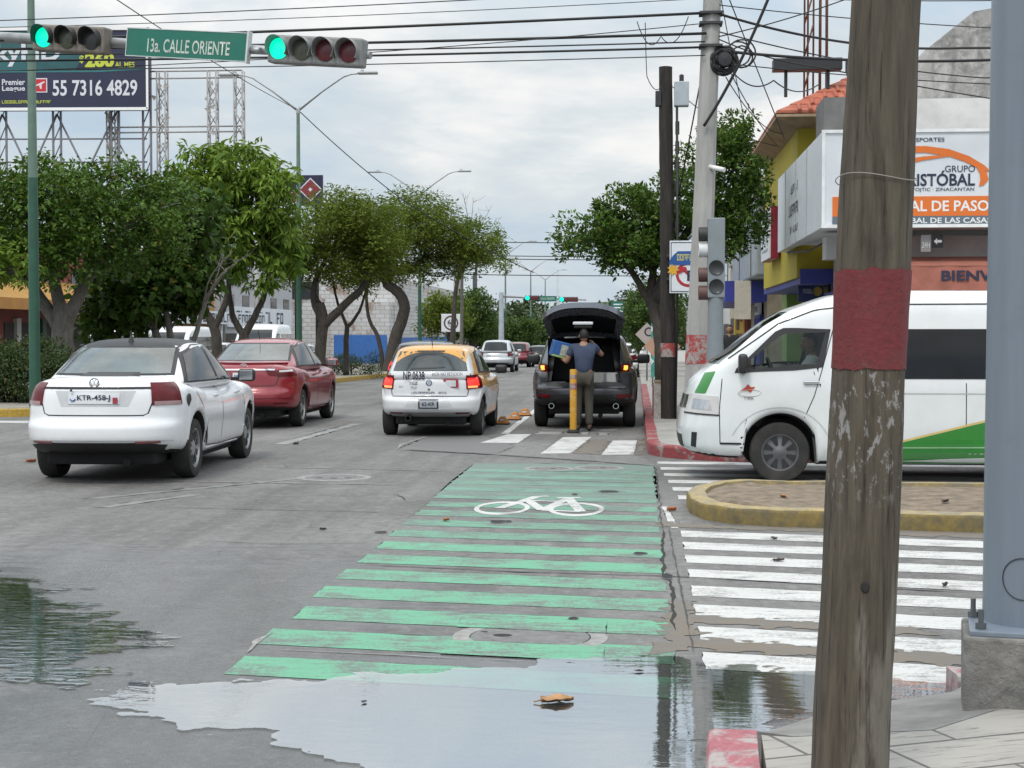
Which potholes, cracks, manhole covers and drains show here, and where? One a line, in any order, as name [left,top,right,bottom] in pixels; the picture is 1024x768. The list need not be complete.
manhole cover [452,627,608,646]
